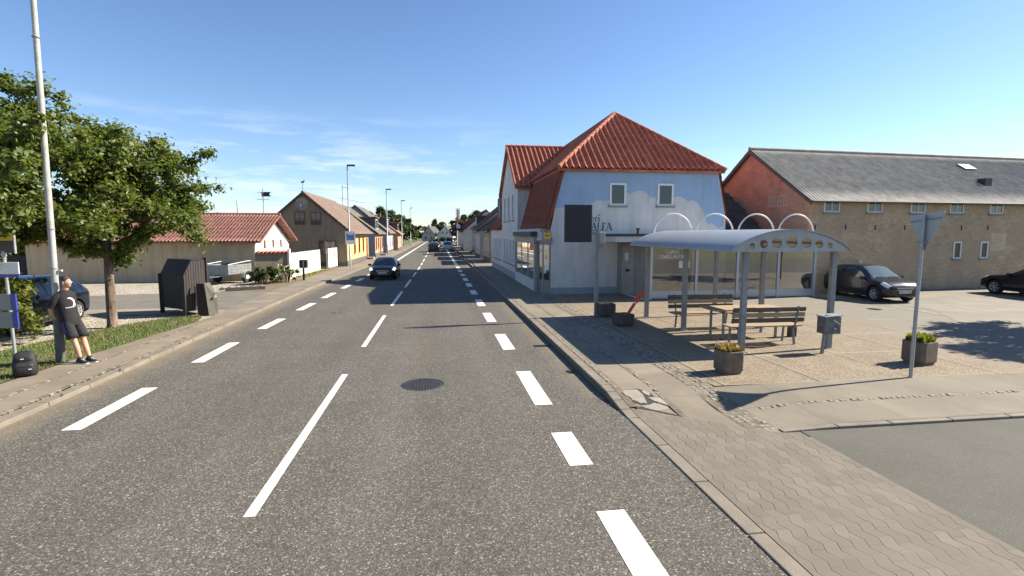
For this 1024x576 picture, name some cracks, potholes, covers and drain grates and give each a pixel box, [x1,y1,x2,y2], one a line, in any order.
manhole cover [401,378,444,391]
